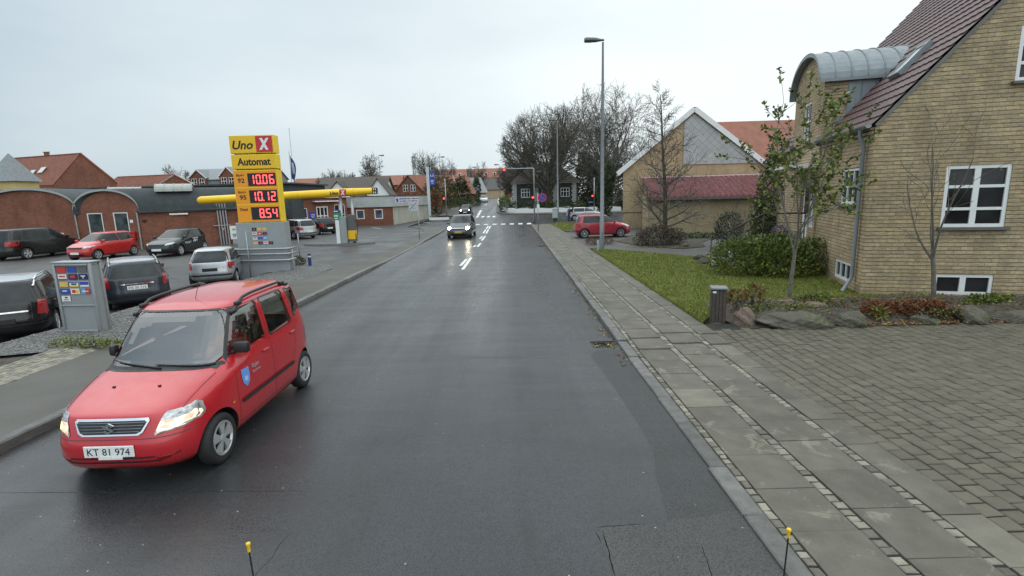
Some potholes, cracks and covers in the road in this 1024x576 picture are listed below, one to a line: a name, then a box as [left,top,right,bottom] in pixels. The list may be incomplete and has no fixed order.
crack [595,523,648,575]
